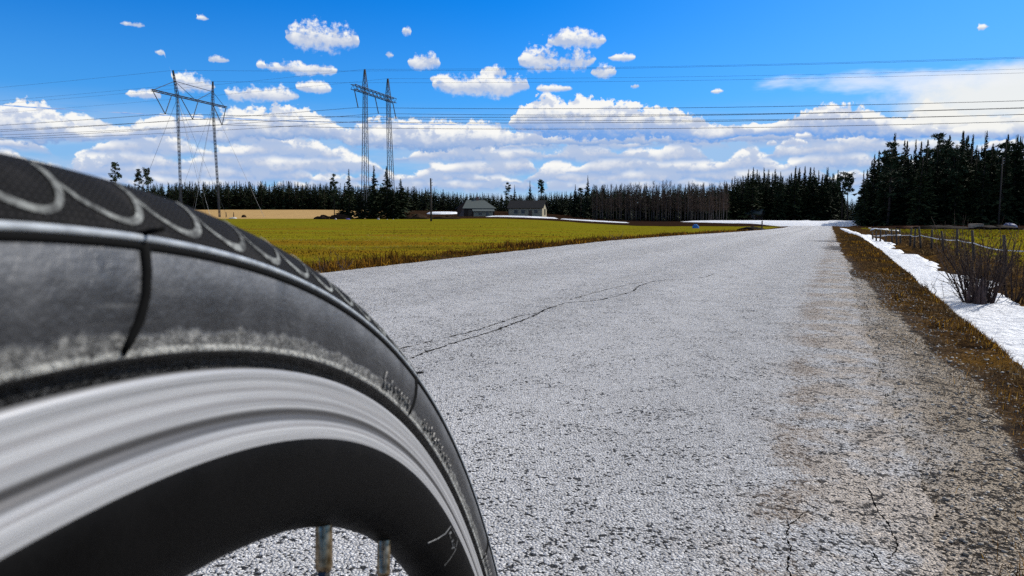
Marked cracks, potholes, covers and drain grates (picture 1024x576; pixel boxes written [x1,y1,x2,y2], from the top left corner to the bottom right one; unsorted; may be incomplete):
crack [868,488,899,572]
crack [400,274,713,359]
crack [786,509,808,576]
